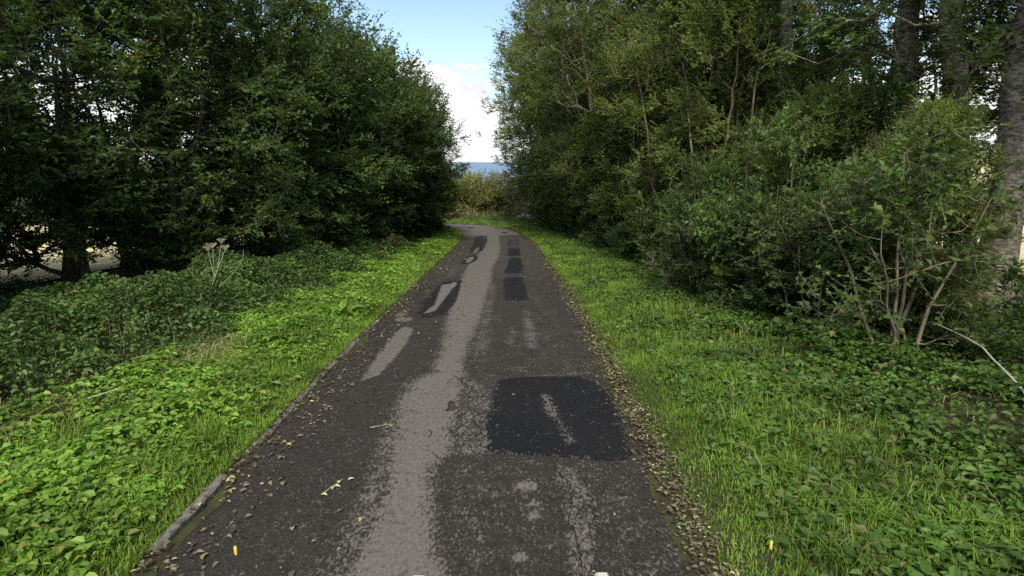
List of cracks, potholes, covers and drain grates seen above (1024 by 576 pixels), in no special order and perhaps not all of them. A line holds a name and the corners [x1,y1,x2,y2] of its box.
crack [553,463,603,576]
